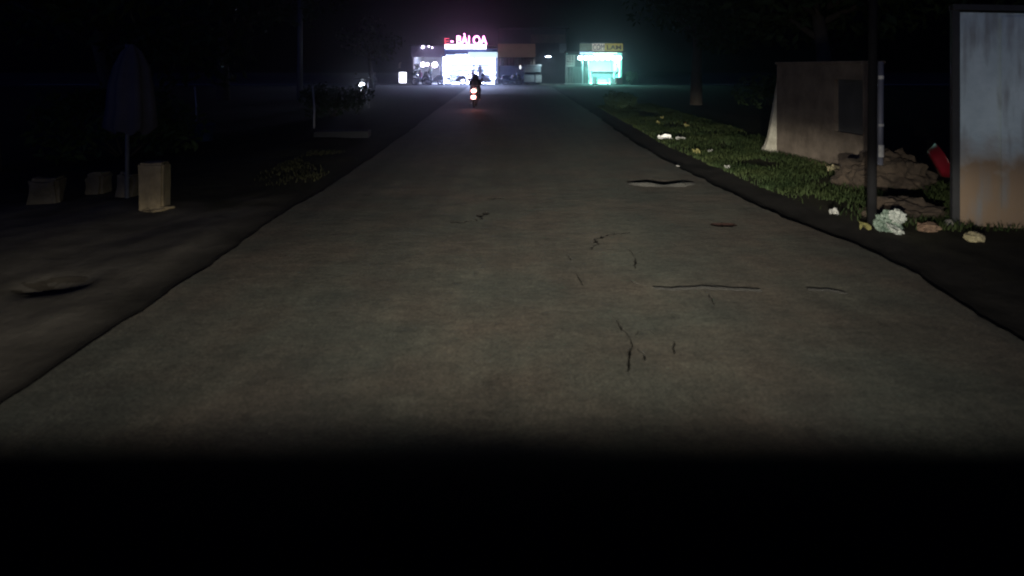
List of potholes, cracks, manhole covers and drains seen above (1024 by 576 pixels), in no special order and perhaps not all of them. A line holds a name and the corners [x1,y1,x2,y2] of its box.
crack [590,232,763,305]
pothole [626,179,696,187]
crack [612,316,676,372]
crack [805,287,849,295]
pothole [10,276,94,296]
crack [450,198,506,223]
